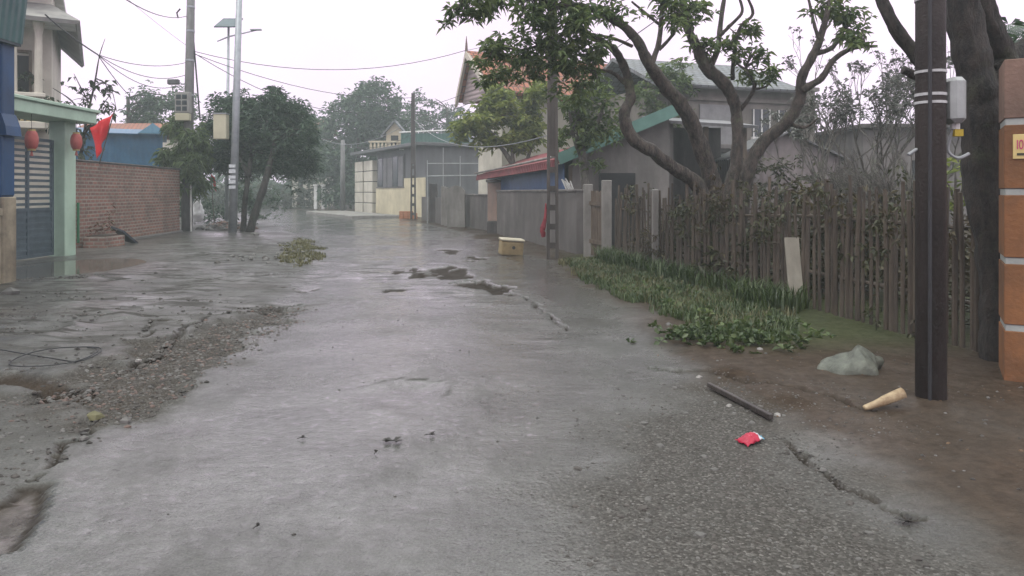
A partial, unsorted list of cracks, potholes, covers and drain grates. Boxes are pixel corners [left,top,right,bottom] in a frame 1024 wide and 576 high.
crack [770,435,930,522]
pothole [0,370,106,406]
crack [451,279,570,331]
pothole [456,280,524,296]
pothole [0,479,66,556]
crack [30,427,101,483]
pothole [389,267,428,279]
pothole [415,265,493,282]
